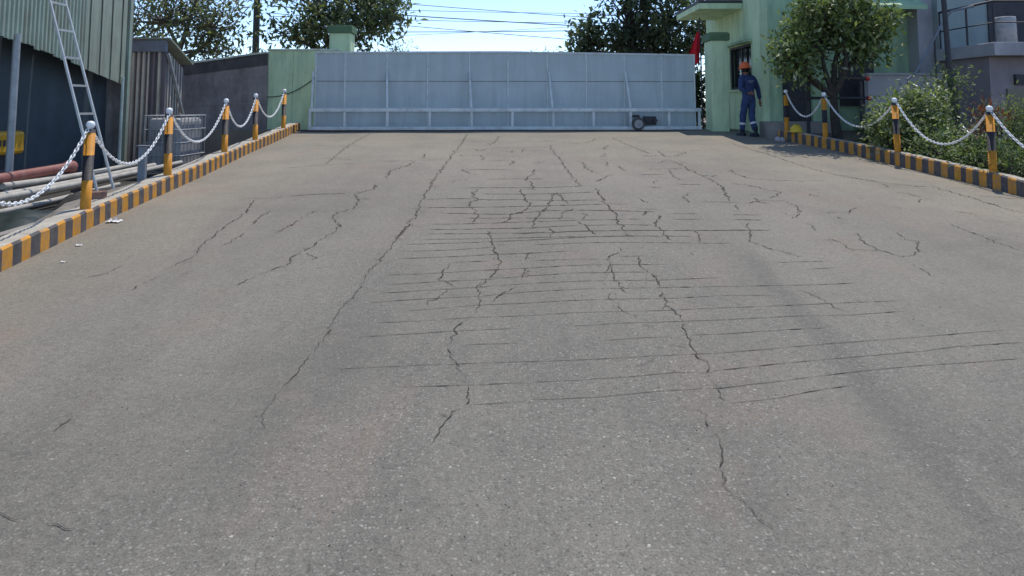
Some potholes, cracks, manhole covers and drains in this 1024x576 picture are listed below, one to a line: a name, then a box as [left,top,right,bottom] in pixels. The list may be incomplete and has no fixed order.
crack [239,159,441,284]
crack [89,196,315,288]
crack [427,139,1023,529]
